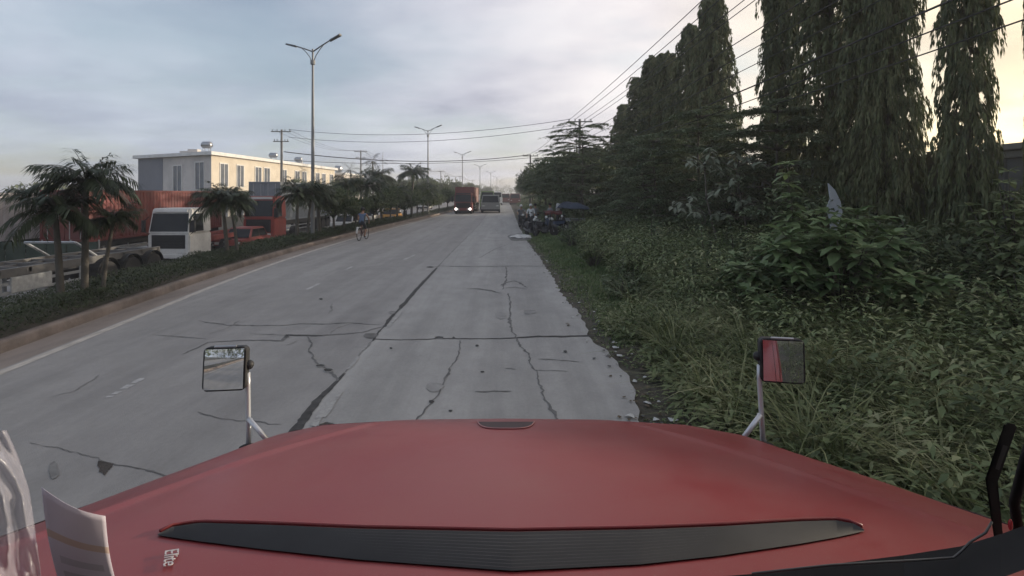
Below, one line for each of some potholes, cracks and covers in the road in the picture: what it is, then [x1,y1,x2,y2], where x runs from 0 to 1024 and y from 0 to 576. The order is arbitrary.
crack [466,244,579,419]
crack [416,341,508,420]
pothole [97,461,113,475]
crack [161,304,384,381]
crack [30,442,166,476]
